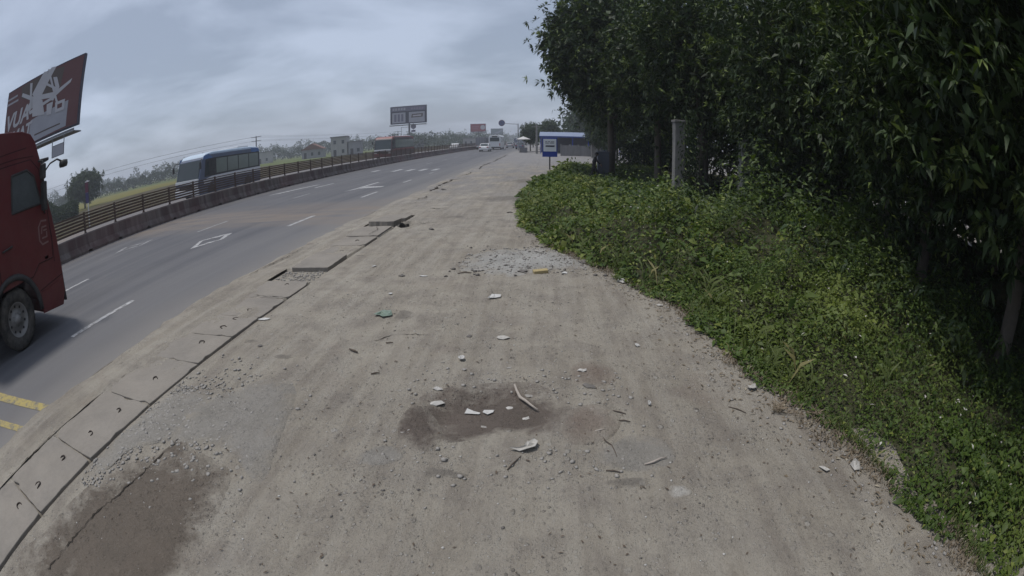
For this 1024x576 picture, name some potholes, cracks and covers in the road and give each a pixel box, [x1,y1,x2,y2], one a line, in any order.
pothole [409,382,572,443]
